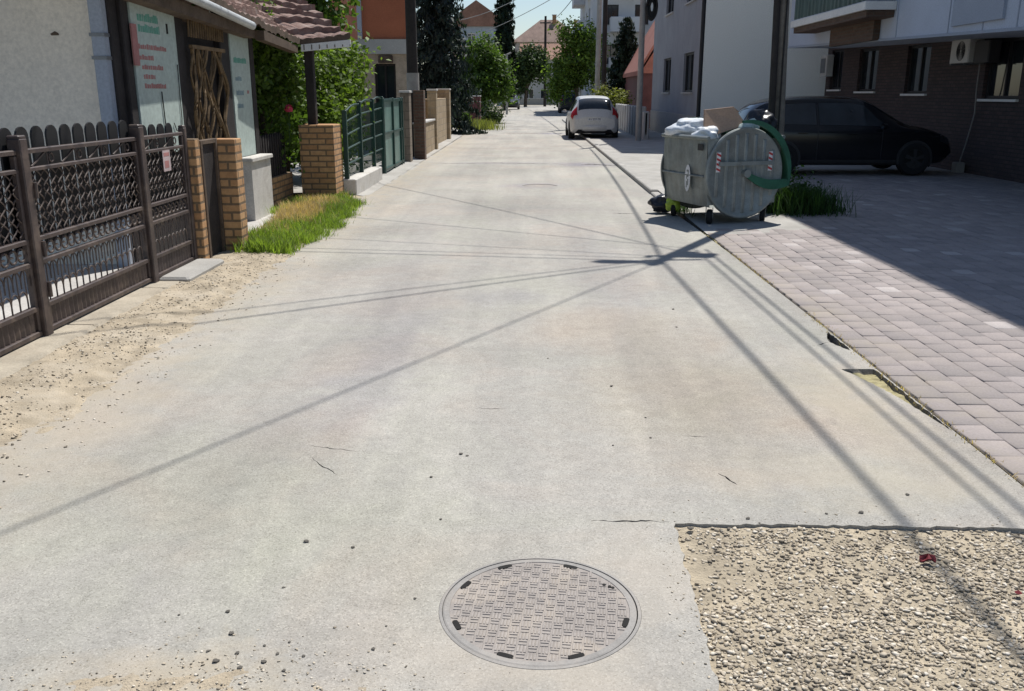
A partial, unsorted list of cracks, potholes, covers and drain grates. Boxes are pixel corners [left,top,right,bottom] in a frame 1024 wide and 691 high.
pothole [827,333,849,349]
manhole cover [439,557,641,670]
pothole [842,369,949,429]
